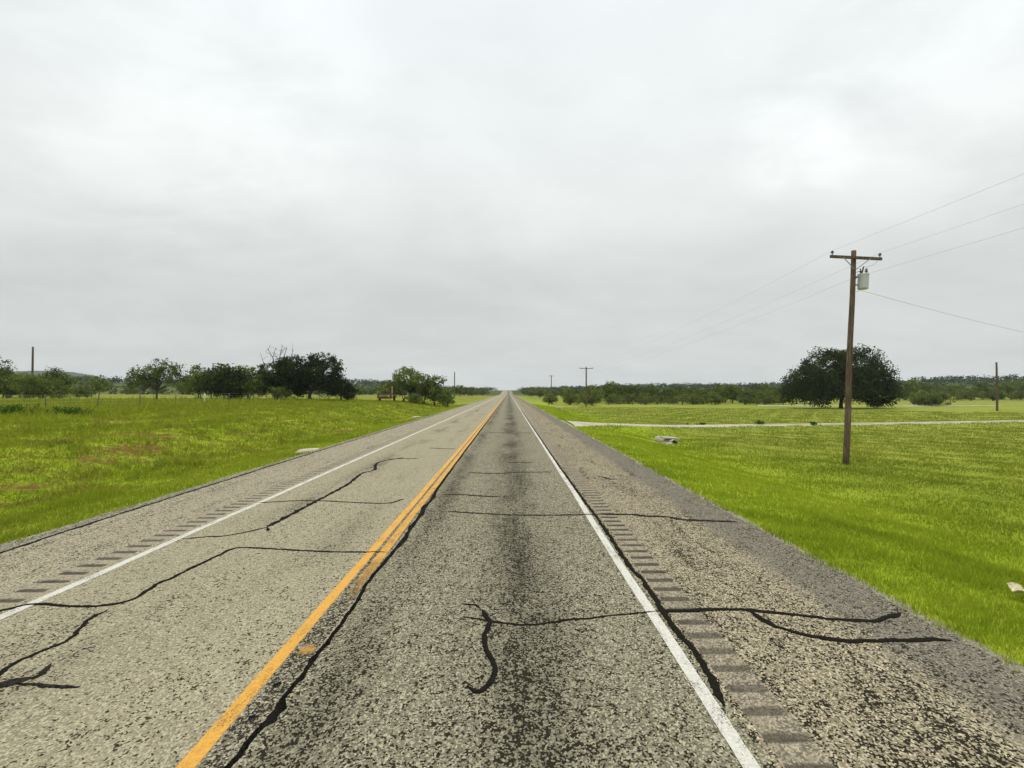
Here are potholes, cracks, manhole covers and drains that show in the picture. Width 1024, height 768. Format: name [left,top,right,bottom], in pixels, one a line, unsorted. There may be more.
crack [0,413,440,554]
crack [468,462,532,474]
